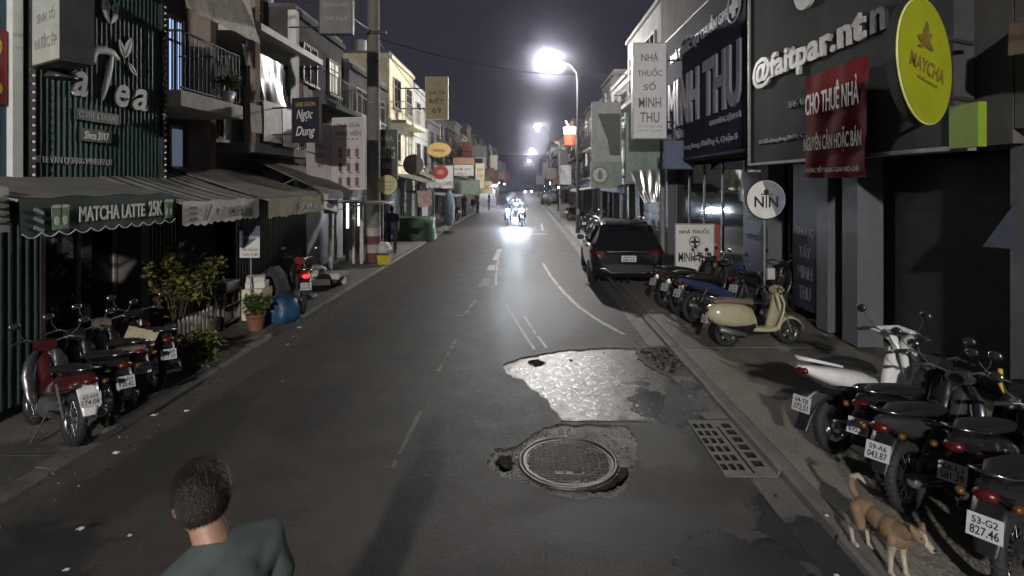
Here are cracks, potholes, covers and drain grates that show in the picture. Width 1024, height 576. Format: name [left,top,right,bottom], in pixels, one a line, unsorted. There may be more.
pothole [640,346,683,375]
pothole [493,454,517,474]
pothole [577,465,633,496]
drain grate [686,420,780,478]
manhole cover [487,423,638,499]
